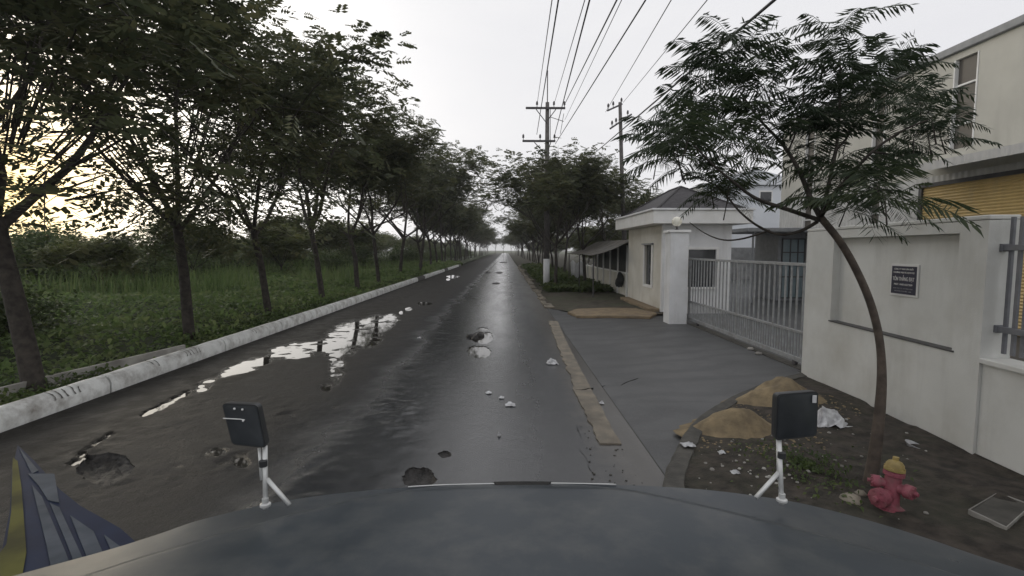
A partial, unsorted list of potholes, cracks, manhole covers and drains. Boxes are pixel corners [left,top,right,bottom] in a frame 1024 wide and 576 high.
manhole cover [968,493,1024,530]
pothole [467,346,491,359]
pothole [76,452,135,486]
pothole [469,331,493,344]
pothole [402,467,438,486]
